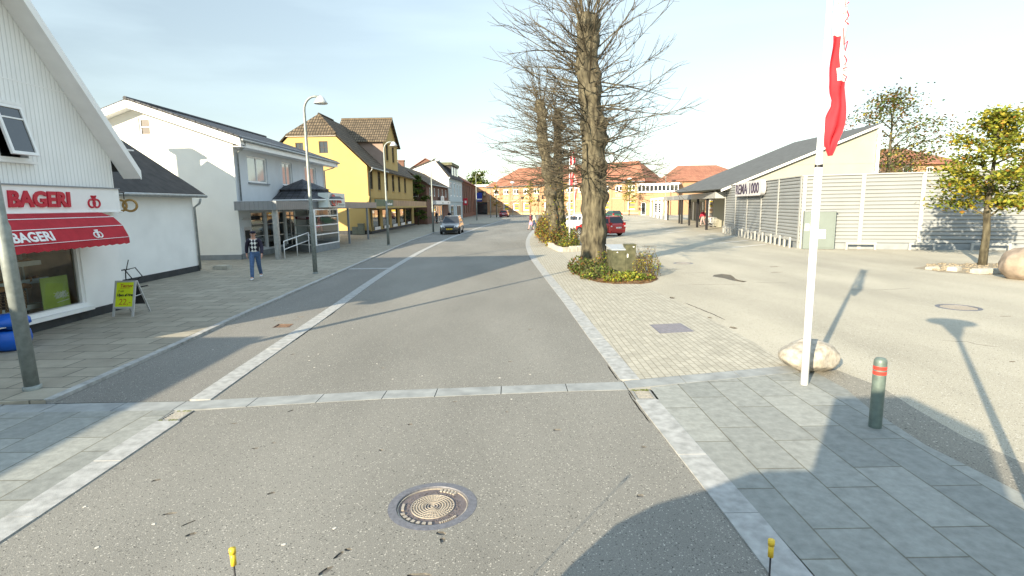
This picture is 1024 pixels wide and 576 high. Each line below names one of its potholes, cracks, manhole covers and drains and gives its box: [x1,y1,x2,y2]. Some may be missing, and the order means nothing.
drain grate [158,410,193,421]
drain grate [630,389,656,400]
manhole cover [387,483,477,531]
utility cover [650,323,694,334]
